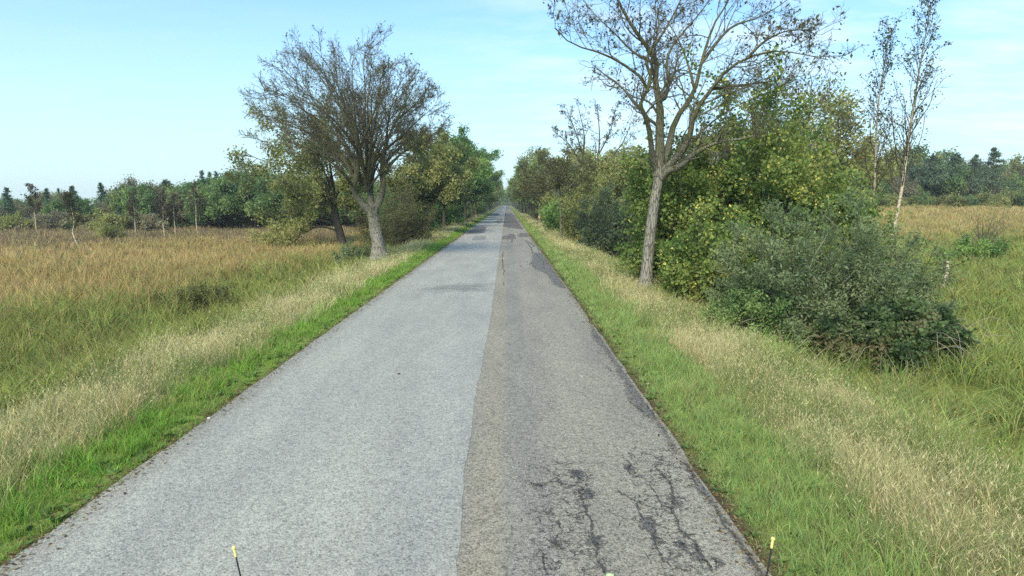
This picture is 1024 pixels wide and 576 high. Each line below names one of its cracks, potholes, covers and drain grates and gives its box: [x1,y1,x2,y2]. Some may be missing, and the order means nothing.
crack [527,401,763,576]
